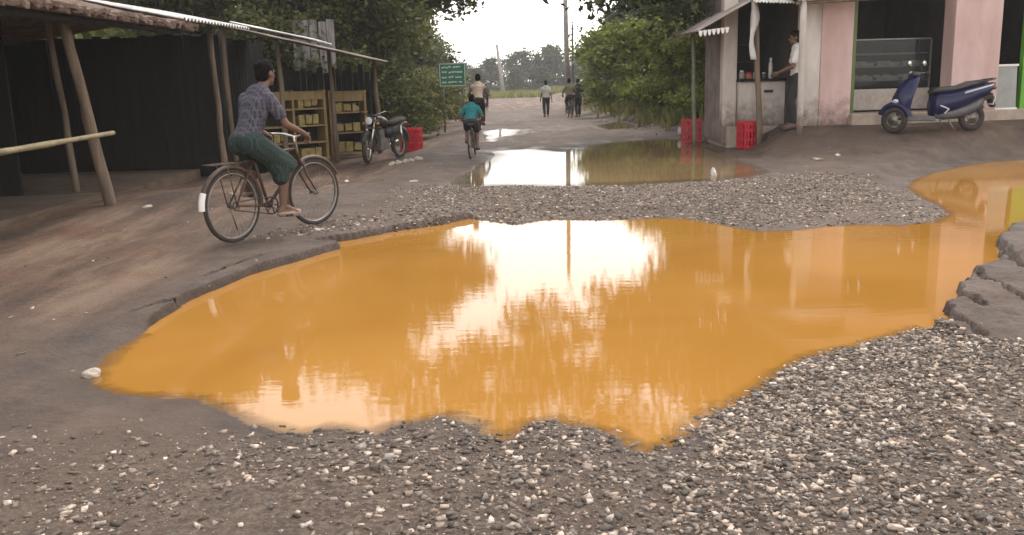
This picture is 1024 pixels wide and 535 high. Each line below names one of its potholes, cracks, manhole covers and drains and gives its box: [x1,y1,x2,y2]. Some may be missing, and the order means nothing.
pothole [479,128,526,142]
pothole [61,157,1024,460]
crack [126,298,166,313]
pothole [436,137,784,188]
